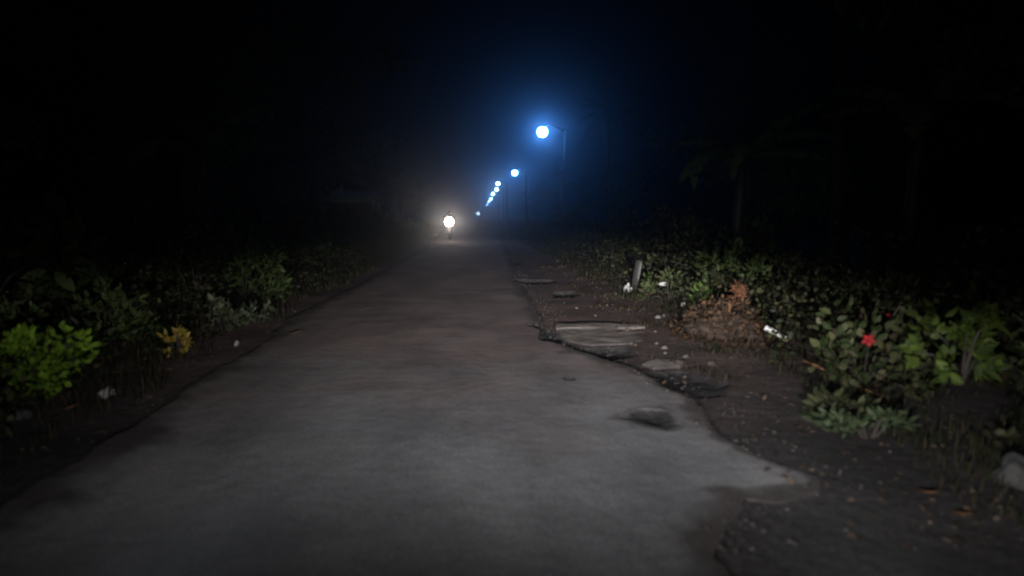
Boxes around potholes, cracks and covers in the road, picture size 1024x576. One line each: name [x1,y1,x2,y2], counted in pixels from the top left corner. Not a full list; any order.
pothole [616,408,687,431]
